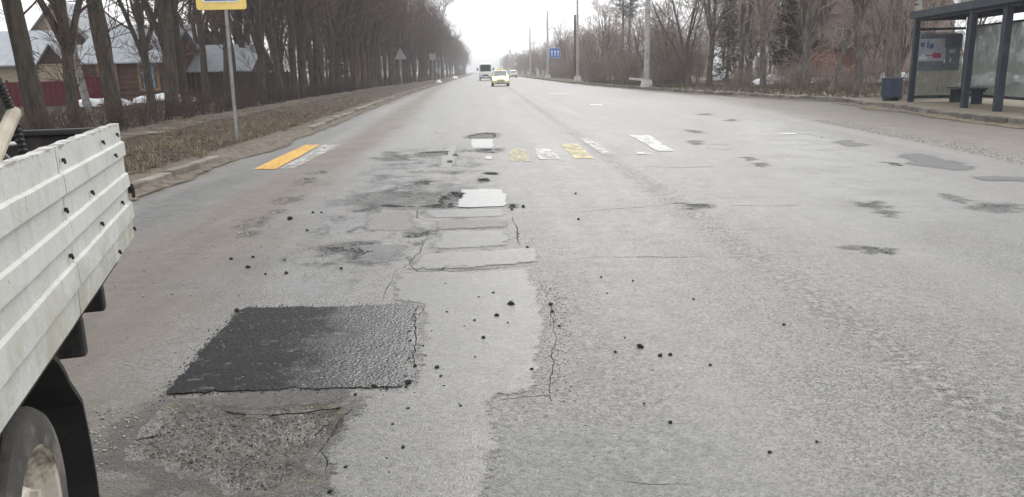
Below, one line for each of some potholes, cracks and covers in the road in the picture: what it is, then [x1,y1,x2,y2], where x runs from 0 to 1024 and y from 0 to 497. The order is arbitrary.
crack [382,240,426,300]
pothole [849,246,895,254]
pothole [971,204,1019,212]
pothole [319,242,374,262]
crack [503,283,557,402]
pothole [858,201,896,217]
pothole [124,400,349,497]
crack [223,405,352,473]
